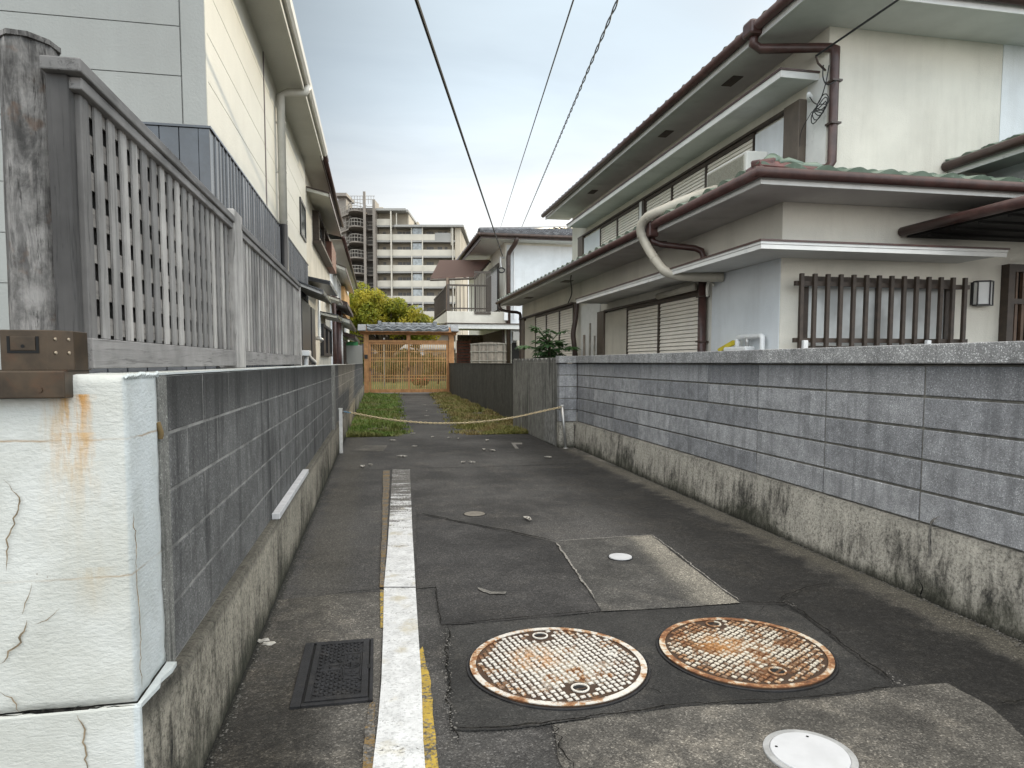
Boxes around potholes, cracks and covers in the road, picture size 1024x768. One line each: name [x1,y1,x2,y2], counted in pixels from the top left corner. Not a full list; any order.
manhole cover [763,729,859,768]
manhole cover [656,617,839,693]
manhole cover [466,627,651,711]
utility cover [608,553,633,561]
